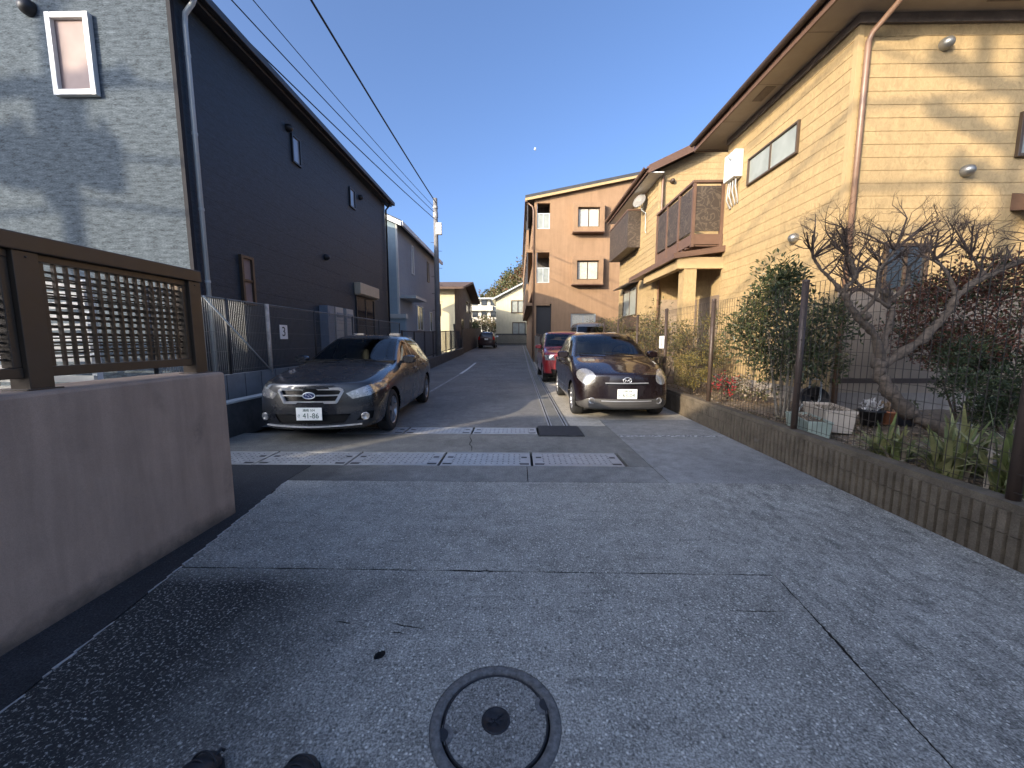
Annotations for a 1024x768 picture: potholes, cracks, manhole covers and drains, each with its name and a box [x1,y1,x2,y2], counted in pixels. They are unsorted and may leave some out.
manhole cover [429,666,562,768]
